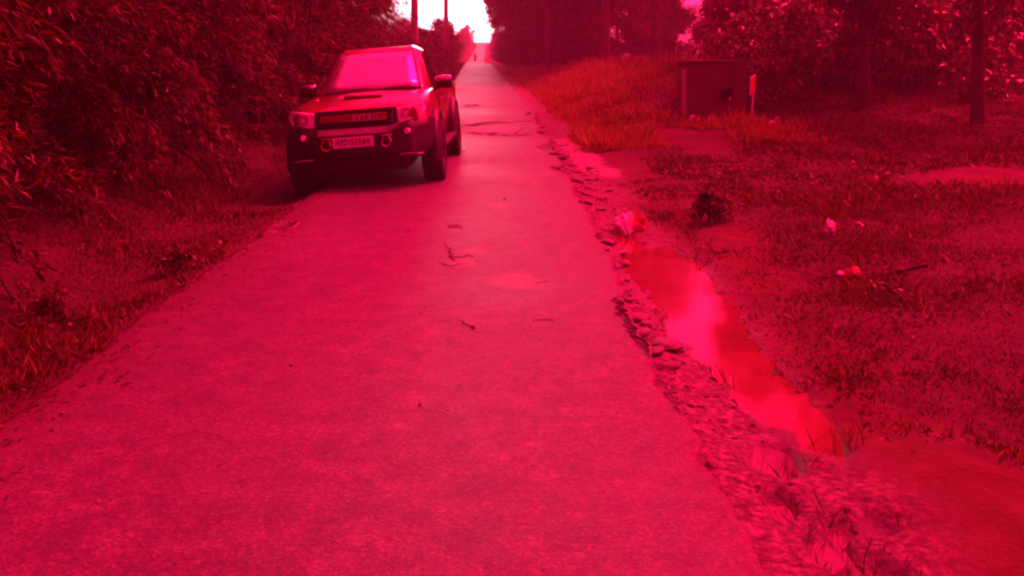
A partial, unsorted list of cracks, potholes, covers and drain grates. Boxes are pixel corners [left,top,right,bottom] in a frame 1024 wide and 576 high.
crack [462,112,534,136]
crack [439,224,474,266]
